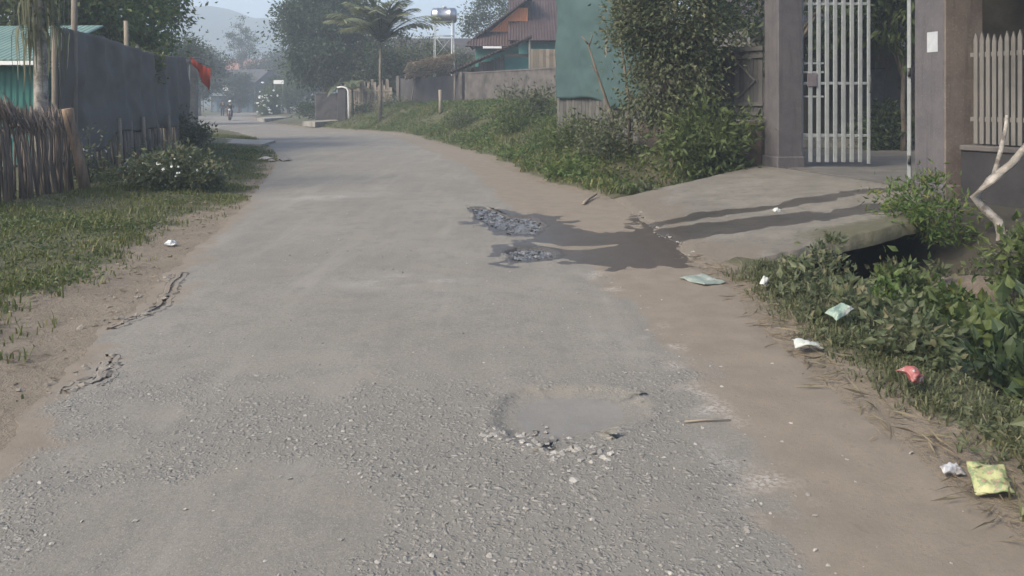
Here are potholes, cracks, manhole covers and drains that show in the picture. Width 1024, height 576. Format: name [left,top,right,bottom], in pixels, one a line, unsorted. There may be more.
pothole [466,206,551,236]
crack [76,273,189,330]
pothole [474,381,667,483]
pothole [497,246,567,264]
crack [16,353,123,394]
